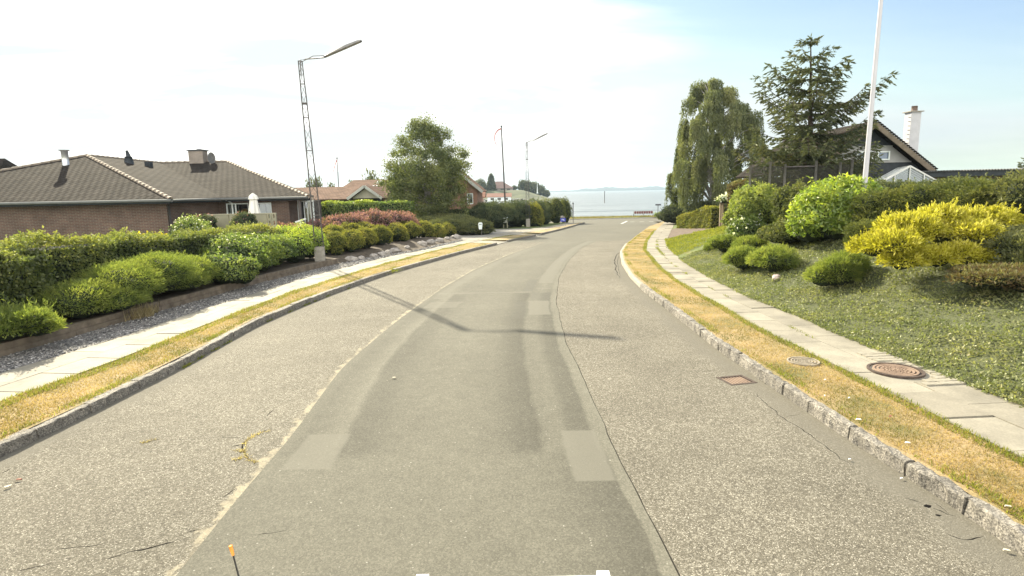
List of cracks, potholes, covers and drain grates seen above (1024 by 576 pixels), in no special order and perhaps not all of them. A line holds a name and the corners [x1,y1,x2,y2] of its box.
crack [16,529,199,571]
crack [182,410,273,462]
crack [757,395,853,466]
drain grate [716,375,758,386]
manhole cover [866,362,926,379]
manhole cover [787,356,820,366]
